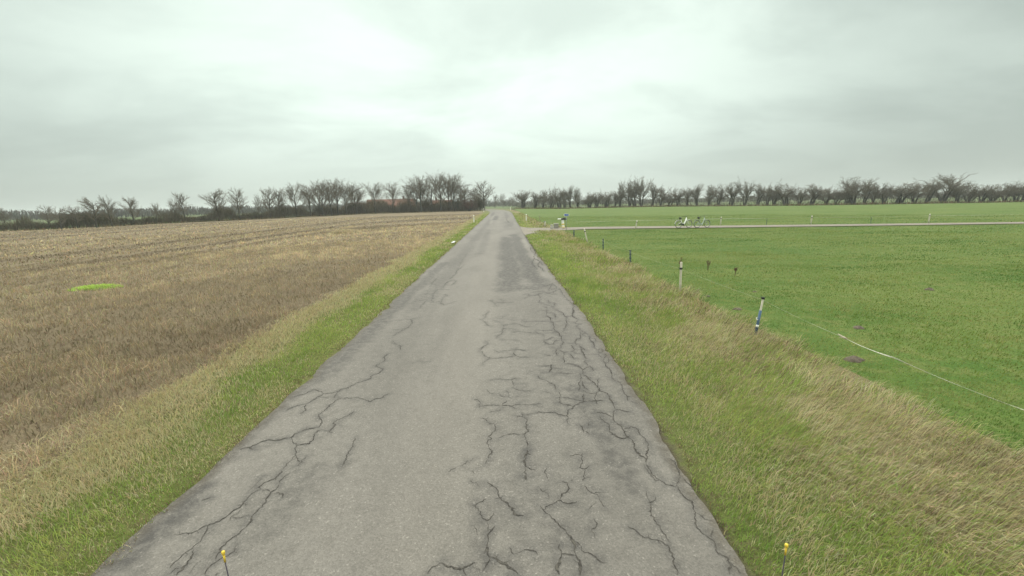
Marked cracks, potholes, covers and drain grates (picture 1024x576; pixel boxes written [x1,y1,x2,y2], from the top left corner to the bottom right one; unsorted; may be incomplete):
crack [170,356,387,575]
crack [427,283,741,575]
